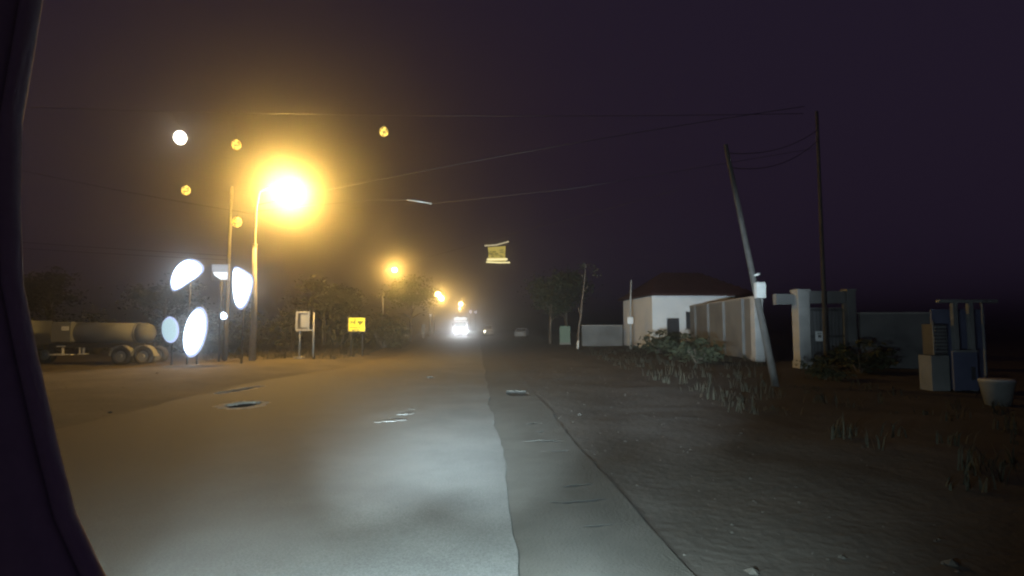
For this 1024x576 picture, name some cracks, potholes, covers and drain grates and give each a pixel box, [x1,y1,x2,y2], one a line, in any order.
pothole [212,401,270,410]
crack [529,423,568,452]
crack [550,484,605,504]
